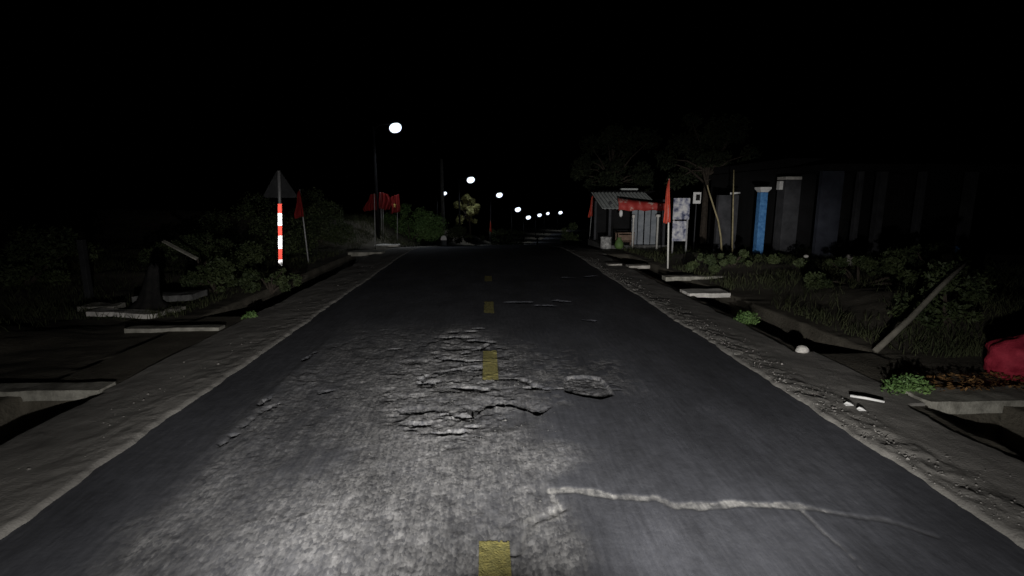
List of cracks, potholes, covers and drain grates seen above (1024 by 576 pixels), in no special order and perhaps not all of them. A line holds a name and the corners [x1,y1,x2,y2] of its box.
crack [510,482,950,576]
pothole [561,374,615,400]
